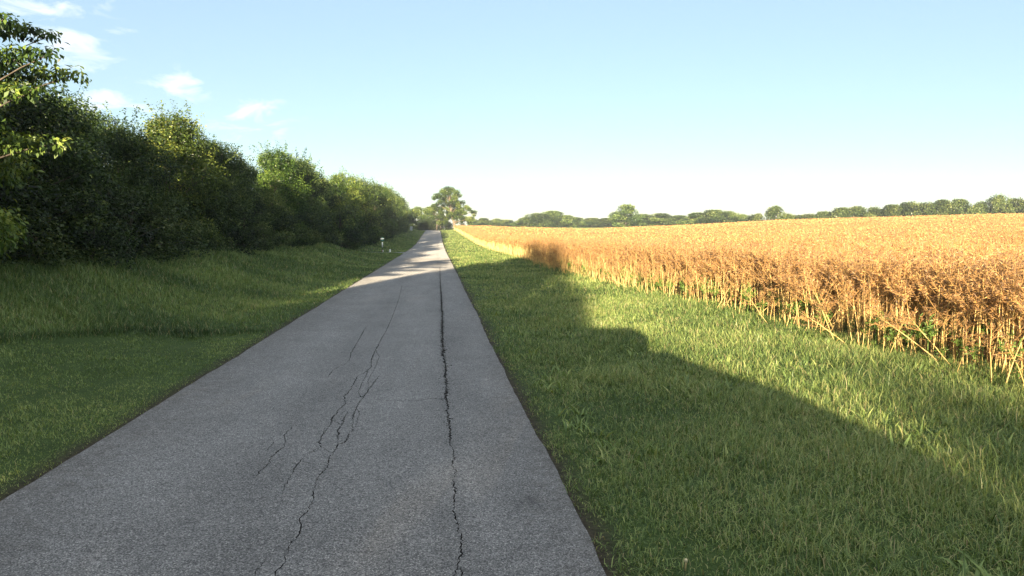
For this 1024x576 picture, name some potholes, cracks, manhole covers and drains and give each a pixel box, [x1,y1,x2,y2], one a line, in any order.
crack [255,286,402,576]
crack [431,269,463,576]
